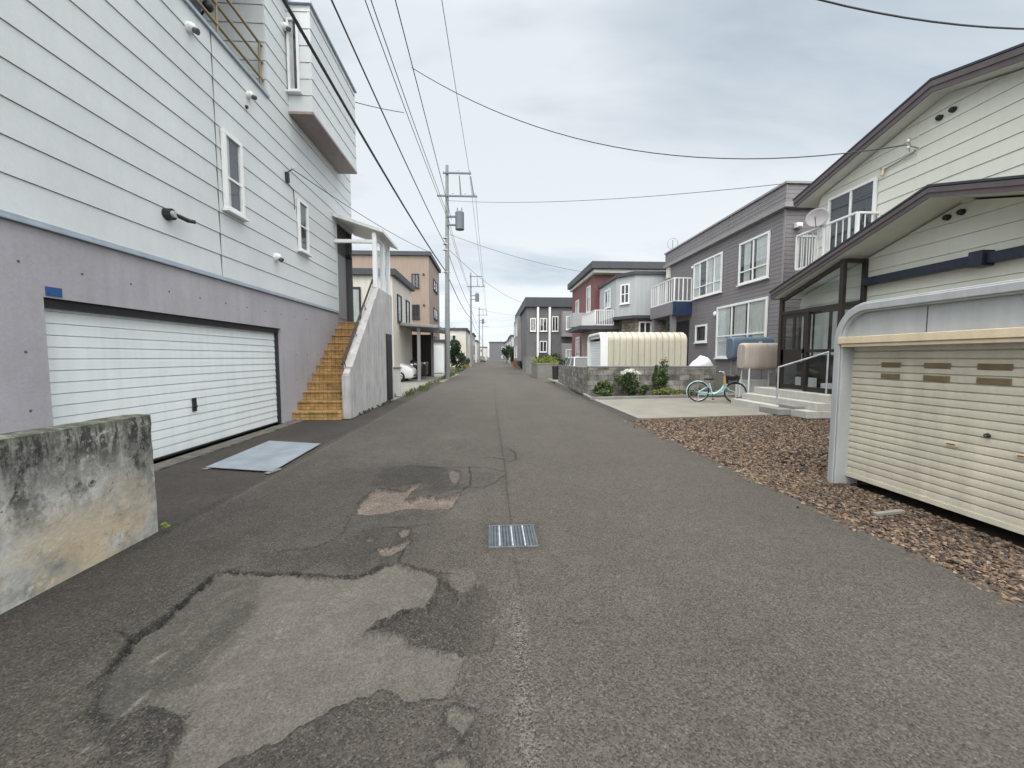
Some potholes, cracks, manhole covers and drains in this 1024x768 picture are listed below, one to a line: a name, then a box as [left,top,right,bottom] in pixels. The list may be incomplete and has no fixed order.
drain grate [488,524,539,548]
crack [87,517,450,688]
pothole [448,469,461,484]
pothole [353,482,461,515]
pothole [377,538,412,556]
crack [382,384,524,596]
